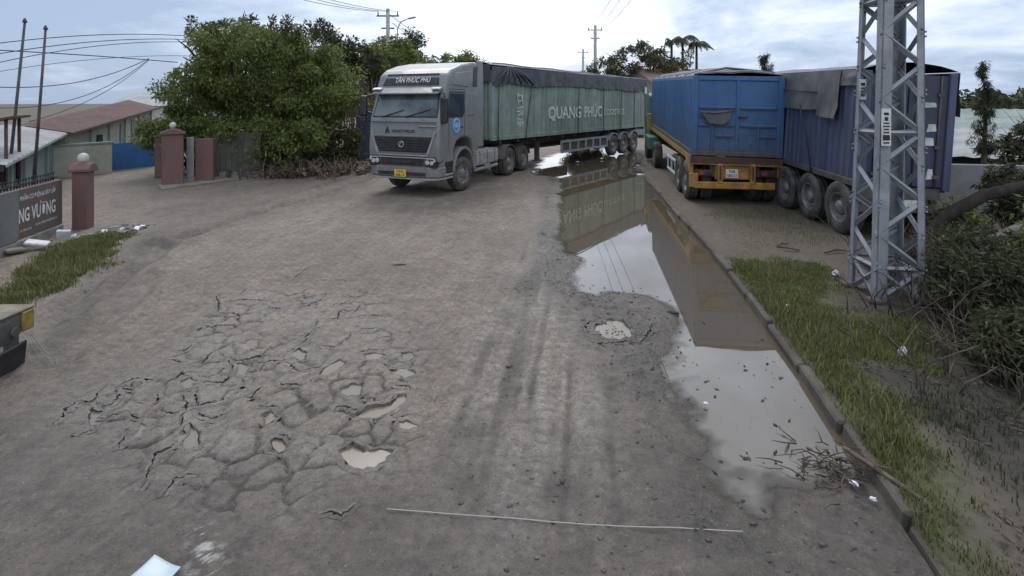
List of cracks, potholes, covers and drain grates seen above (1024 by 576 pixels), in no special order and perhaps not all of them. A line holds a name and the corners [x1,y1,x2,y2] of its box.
pothole [263,430,298,458]
crack [47,288,419,520]
pothole [590,316,636,341]
pothole [171,419,209,454]
pothole [314,357,352,379]
pothole [333,440,401,475]
